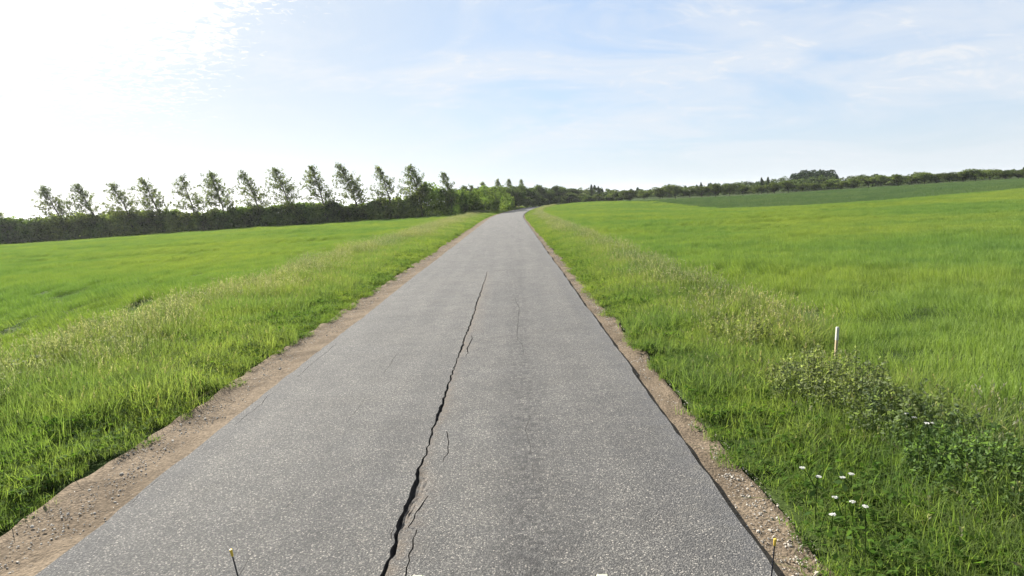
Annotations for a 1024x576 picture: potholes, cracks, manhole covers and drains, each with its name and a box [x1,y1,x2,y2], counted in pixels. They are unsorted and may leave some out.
crack [239,273,487,576]
